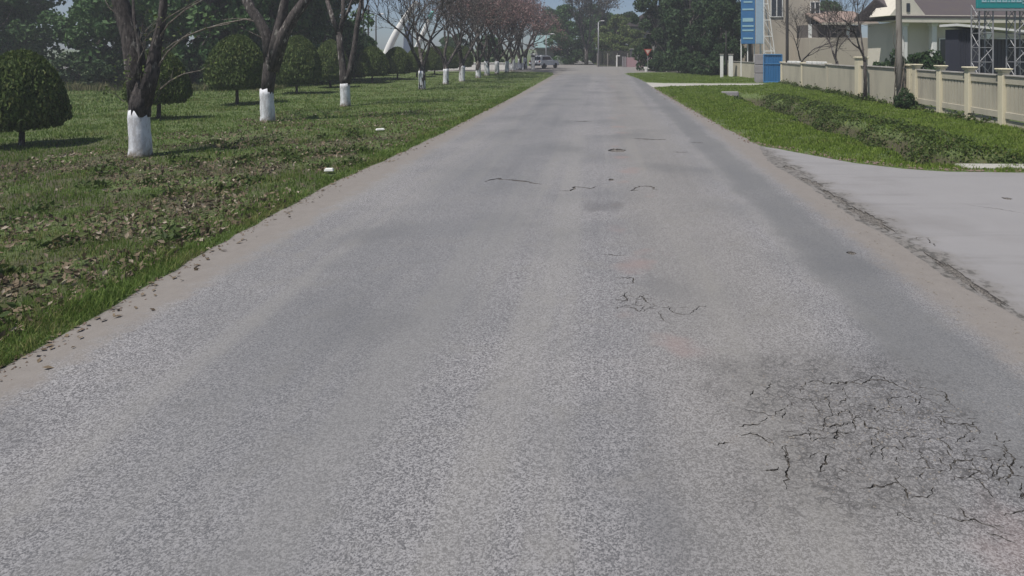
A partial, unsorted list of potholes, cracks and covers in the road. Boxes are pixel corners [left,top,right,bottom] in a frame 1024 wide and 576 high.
crack [616,277,706,321]
crack [718,366,1024,543]
